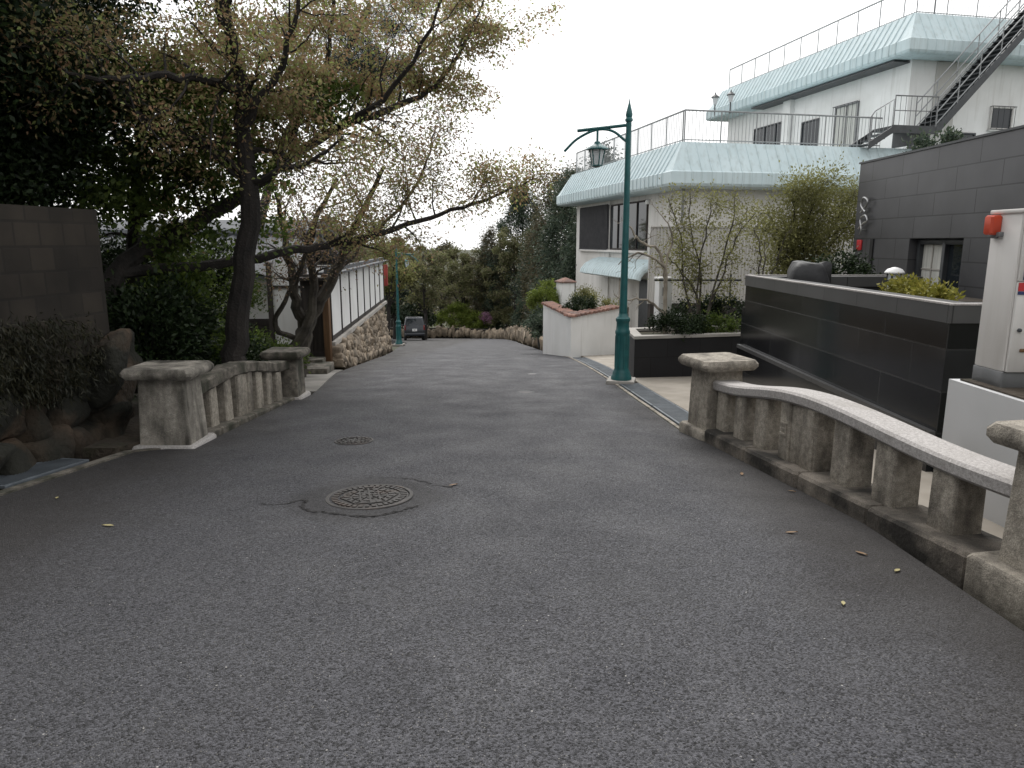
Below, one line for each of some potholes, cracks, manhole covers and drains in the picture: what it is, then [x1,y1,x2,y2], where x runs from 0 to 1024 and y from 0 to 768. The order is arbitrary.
crack [261,477,454,517]
manhole cover [334,436,373,445]
drain grate [630,391,676,407]
drain grate [652,405,689,426]
drain grate [620,383,651,392]
manhole cover [325,484,414,510]
drain grate [585,363,613,372]
